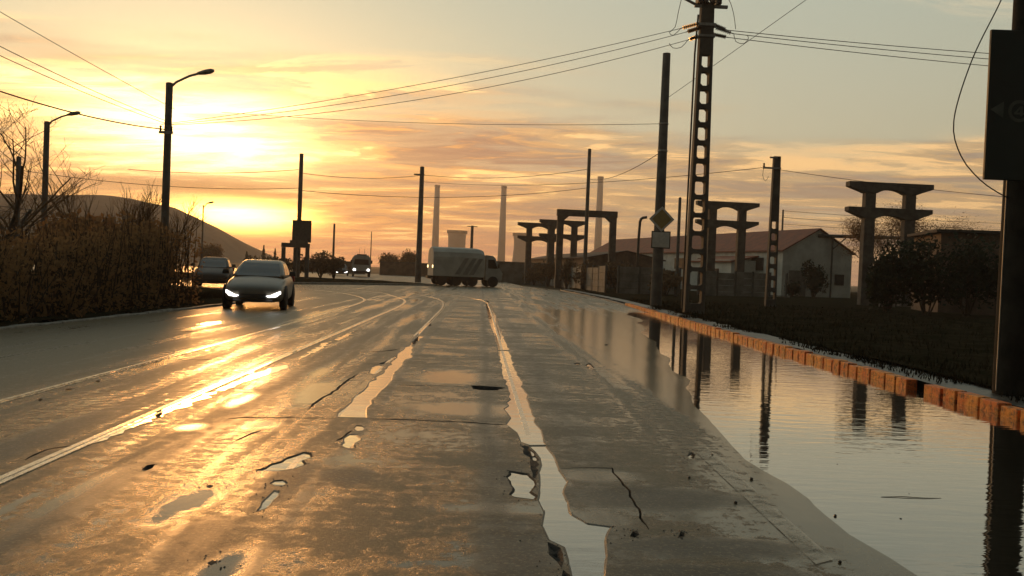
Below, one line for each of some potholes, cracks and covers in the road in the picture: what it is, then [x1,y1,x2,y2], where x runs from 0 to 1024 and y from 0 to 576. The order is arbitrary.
pothole [340,434,361,450]
pothole [256,452,313,471]
pothole [506,470,537,500]
pothole [520,445,539,478]
crack [563,467,649,530]
pothole [529,445,612,576]
crack [307,374,358,410]
pothole [256,490,280,512]
